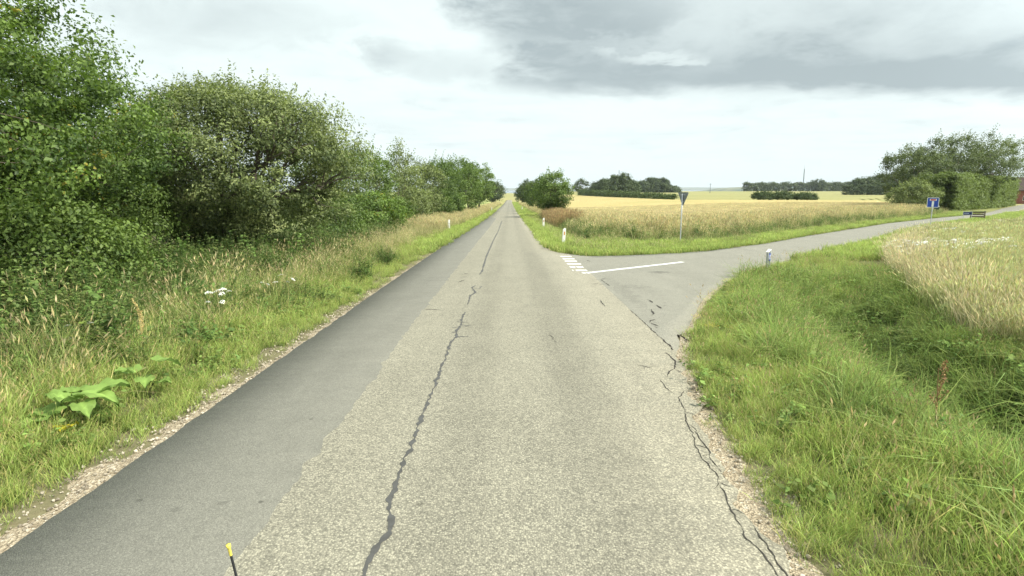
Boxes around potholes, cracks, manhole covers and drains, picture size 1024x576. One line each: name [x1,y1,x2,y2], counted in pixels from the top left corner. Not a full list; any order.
crack [641,353,788,576]
